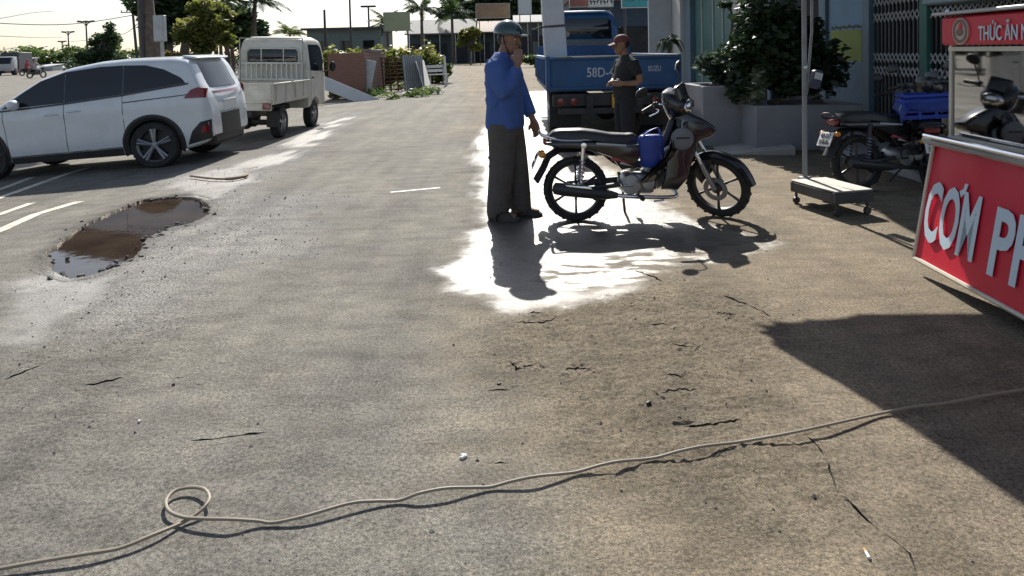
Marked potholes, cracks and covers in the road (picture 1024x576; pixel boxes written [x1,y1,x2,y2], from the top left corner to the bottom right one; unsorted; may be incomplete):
crack [181,426,277,448]
pothole [33,194,217,282]
crack [74,371,135,392]
crack [480,268,781,437]
crack [0,361,50,384]
